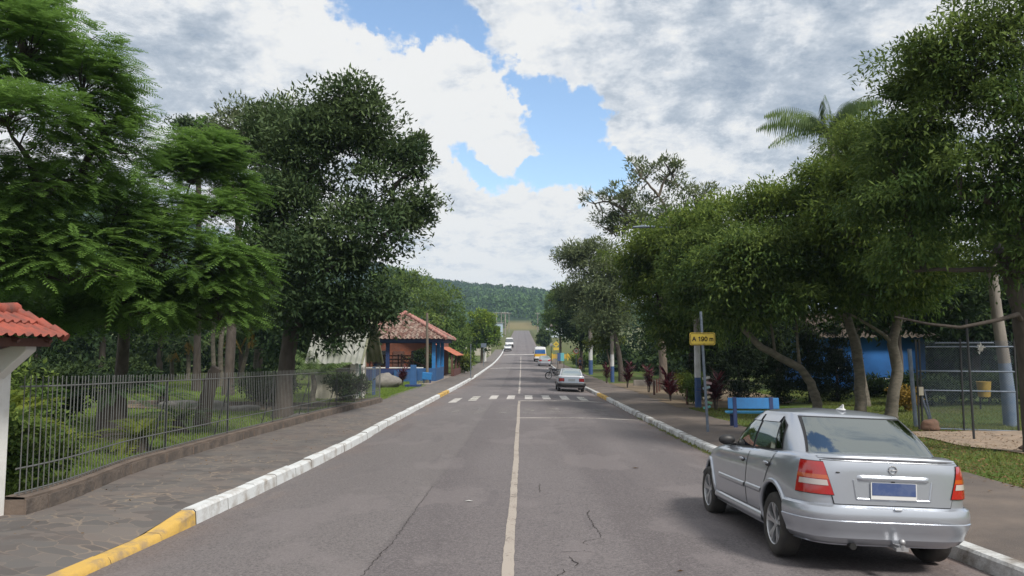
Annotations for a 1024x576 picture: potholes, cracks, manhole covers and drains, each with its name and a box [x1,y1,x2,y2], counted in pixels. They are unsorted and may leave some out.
crack [557,511,601,576]
